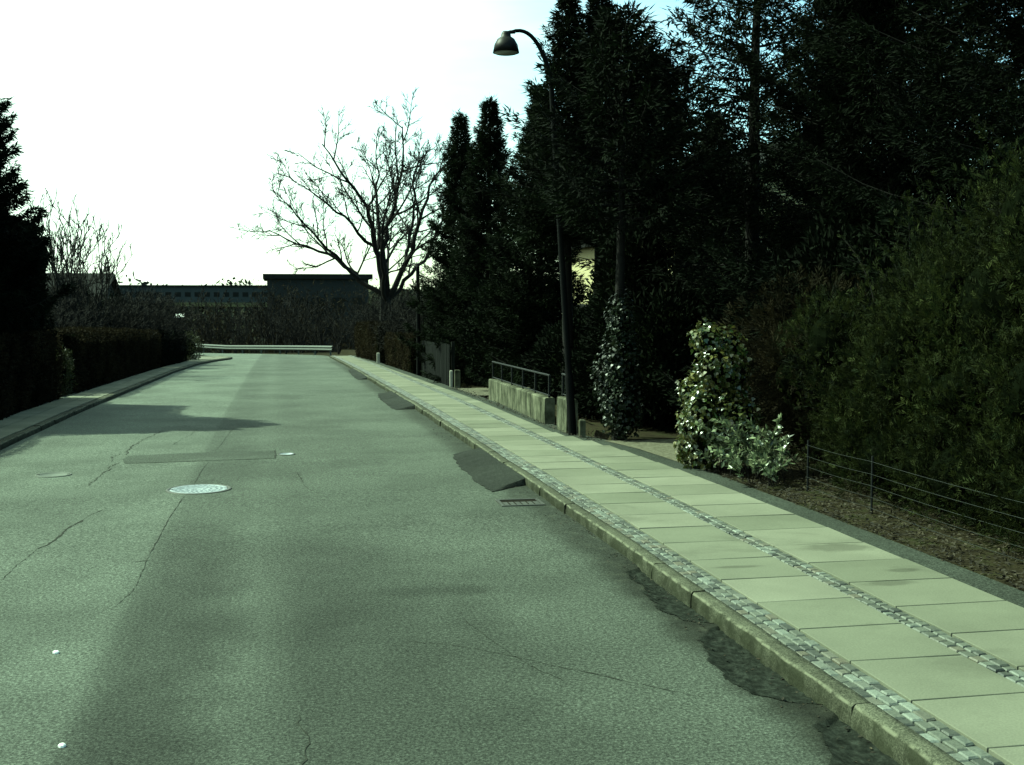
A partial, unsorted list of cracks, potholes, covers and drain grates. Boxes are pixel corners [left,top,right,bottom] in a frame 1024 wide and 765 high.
crack [297,714,310,765]
crack [2,508,106,580]
crack [89,431,194,486]
crack [405,620,695,696]
manhole cover [166,484,231,494]
drain grate [495,498,545,507]
